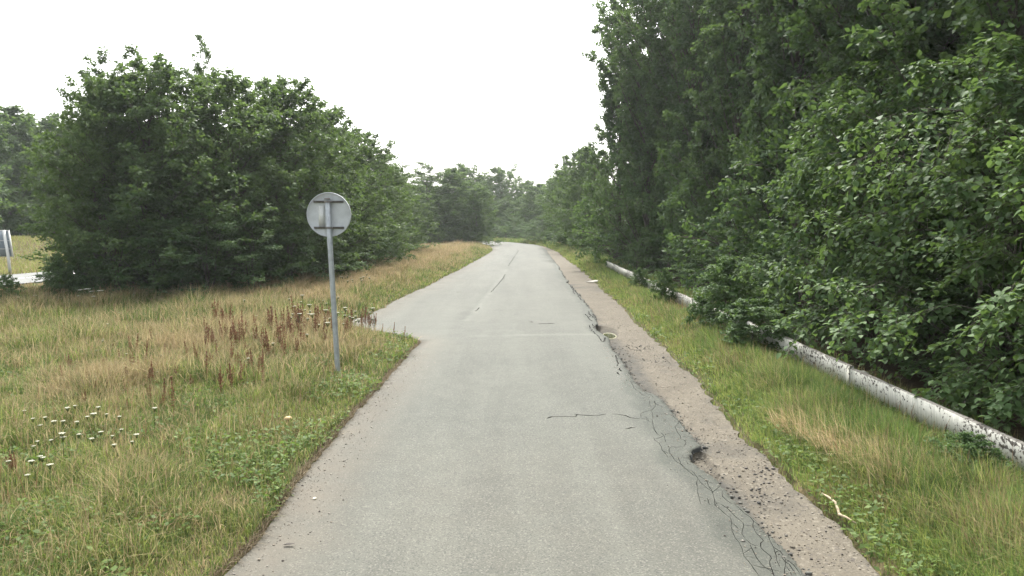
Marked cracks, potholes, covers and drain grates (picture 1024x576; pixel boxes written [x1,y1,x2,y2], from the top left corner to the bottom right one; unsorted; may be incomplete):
crack [548,384,800,576]
crack [568,284,622,374]
